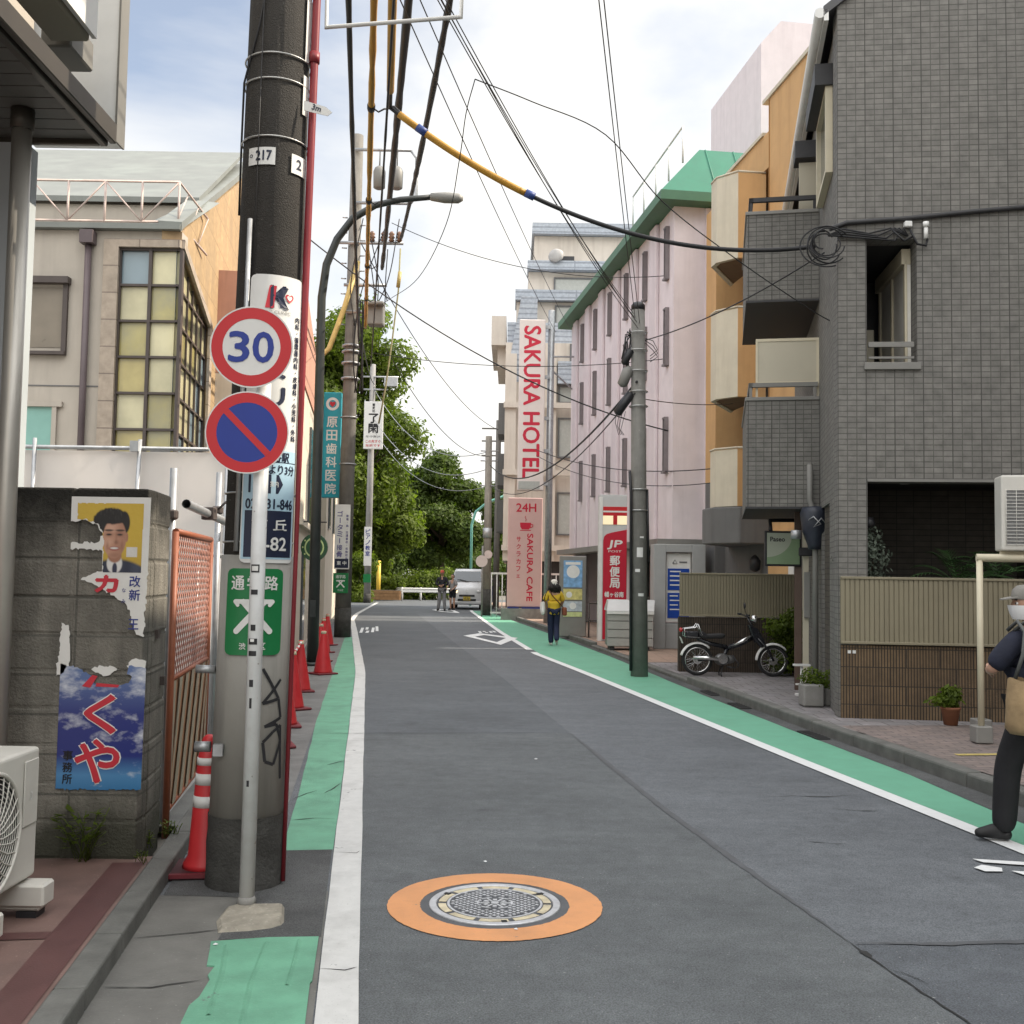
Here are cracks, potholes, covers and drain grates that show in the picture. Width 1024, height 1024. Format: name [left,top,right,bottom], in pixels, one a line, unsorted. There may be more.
manhole cover [429,884,561,926]
drain grate [797,730,830,740]
